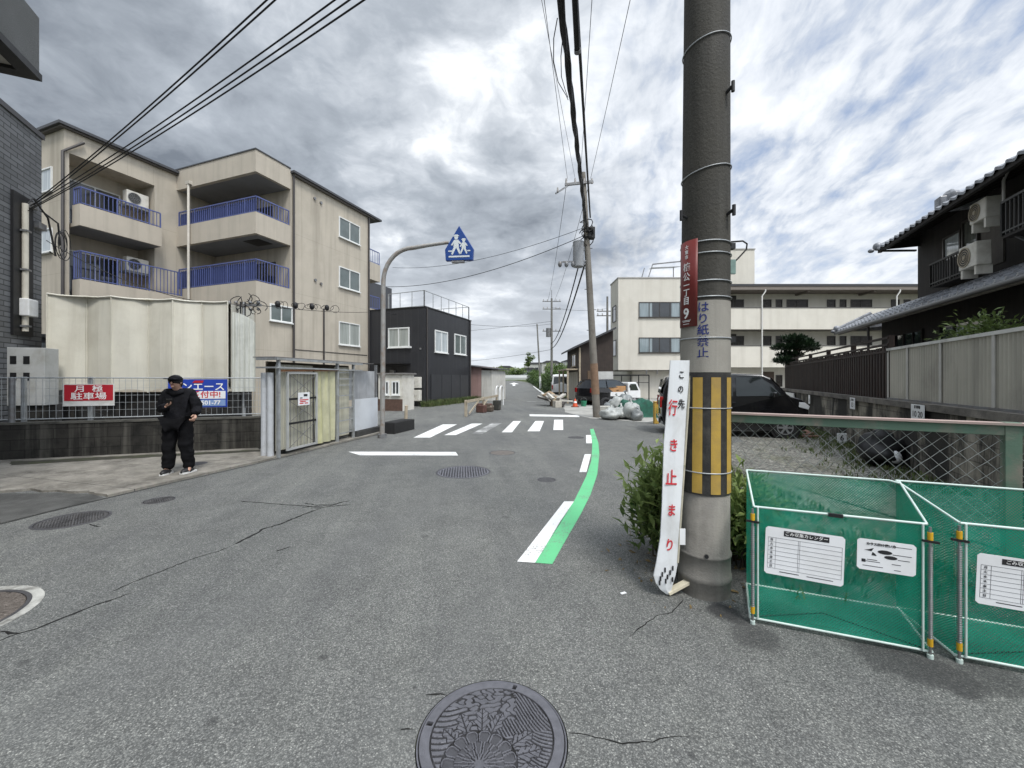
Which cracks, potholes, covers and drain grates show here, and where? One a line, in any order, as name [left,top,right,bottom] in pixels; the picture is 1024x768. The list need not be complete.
crack [632,600,683,635]
manhole cover [29,510,112,530]
crack [569,732,689,745]
manhole cover [436,466,491,479]
crack [0,500,351,641]
manhole cover [142,496,176,504]
manhole cover [416,681,567,768]
manhole cover [0,585,45,627]
